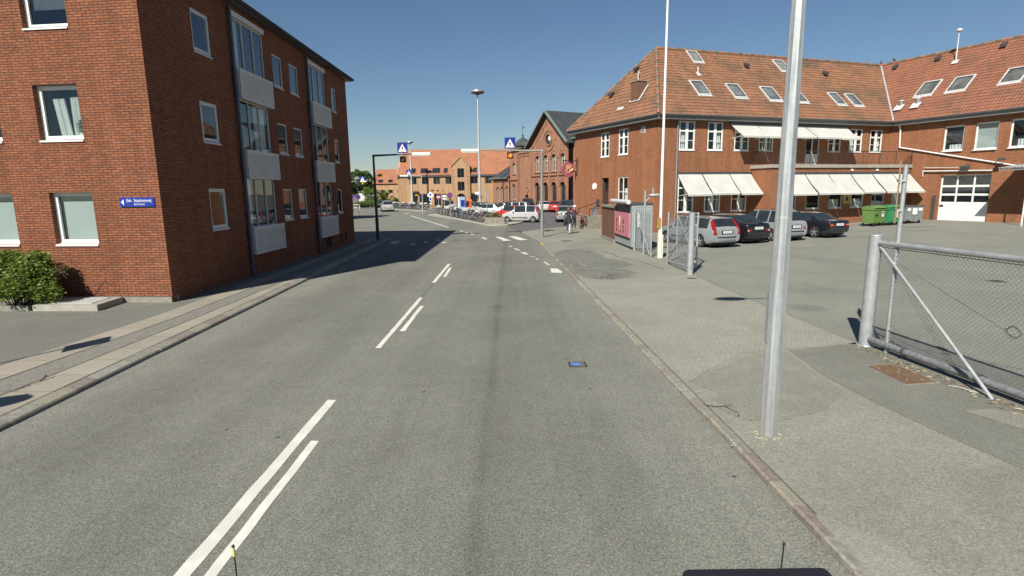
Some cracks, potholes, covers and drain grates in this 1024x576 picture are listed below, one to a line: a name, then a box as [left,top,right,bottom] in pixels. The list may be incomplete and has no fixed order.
utility cover [864,364,940,386]
